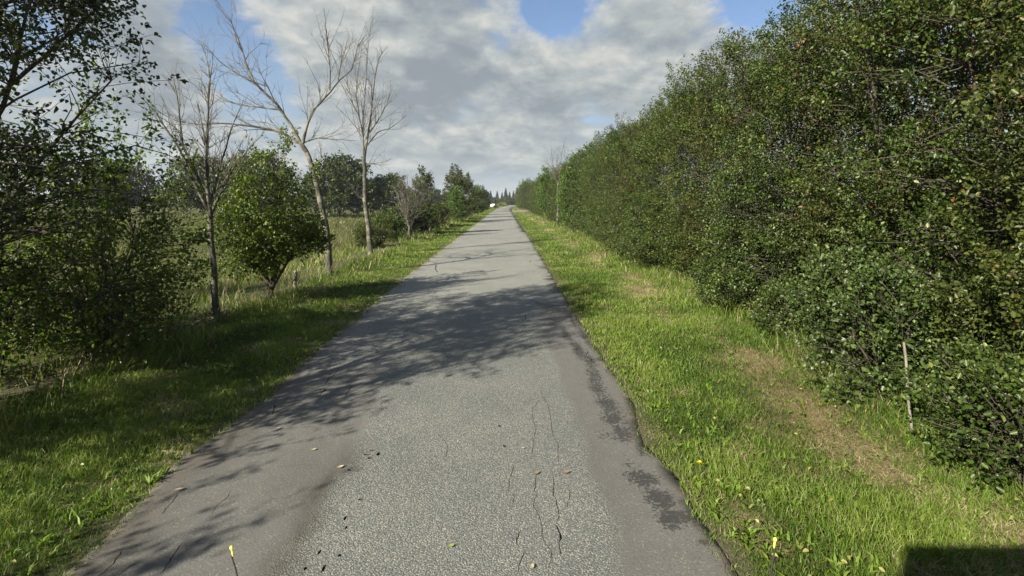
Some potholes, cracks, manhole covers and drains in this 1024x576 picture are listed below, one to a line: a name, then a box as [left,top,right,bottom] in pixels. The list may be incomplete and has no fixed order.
crack [516,386,570,574]
